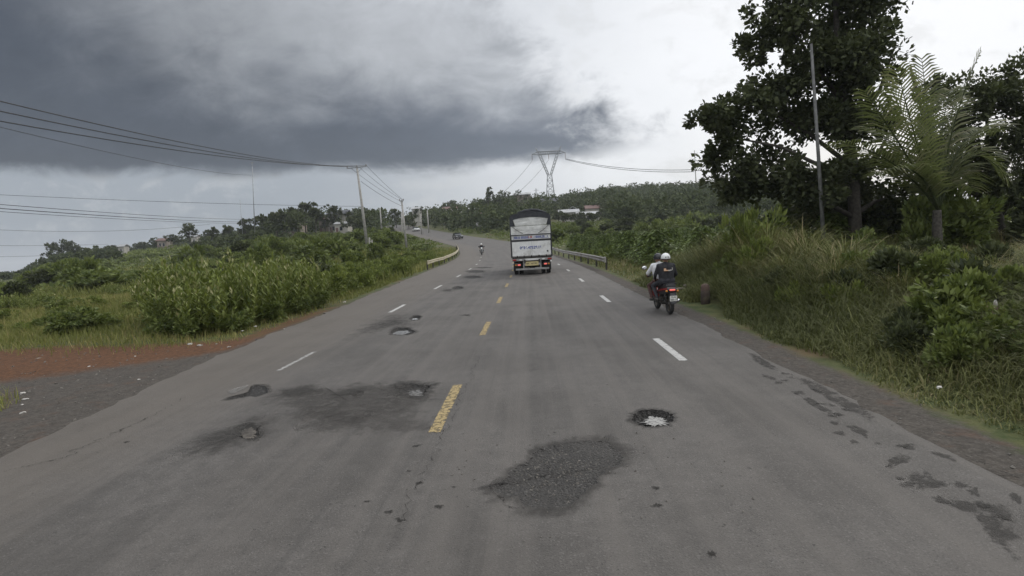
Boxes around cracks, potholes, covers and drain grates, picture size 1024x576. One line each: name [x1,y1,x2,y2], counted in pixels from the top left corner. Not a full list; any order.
pothole [628,409,675,427]
pothole [225,384,269,400]
pothole [238,423,261,439]
pothole [394,382,436,397]
pothole [390,327,416,335]
